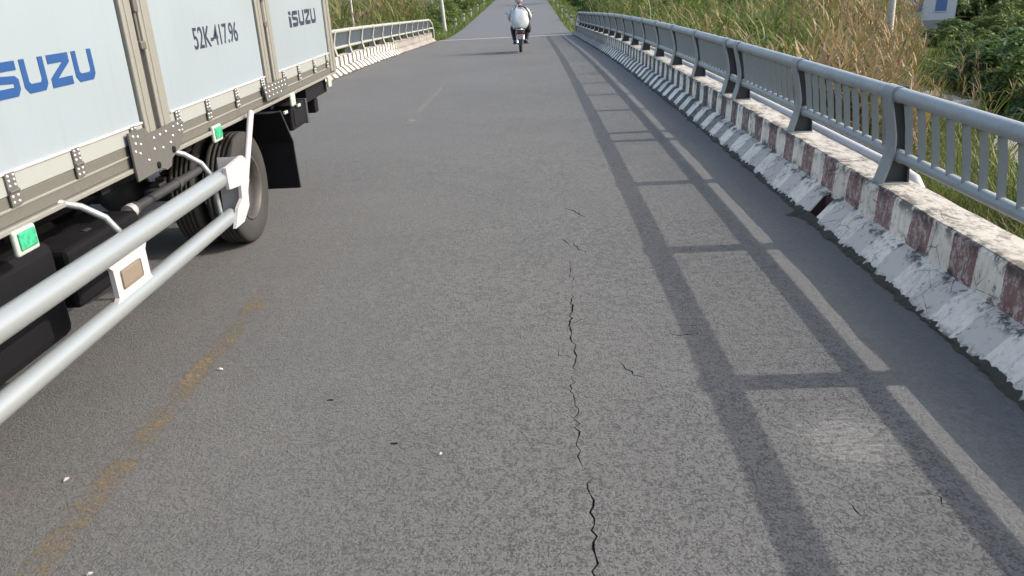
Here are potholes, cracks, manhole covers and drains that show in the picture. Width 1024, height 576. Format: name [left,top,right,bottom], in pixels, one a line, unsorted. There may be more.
crack [558,240,599,576]
